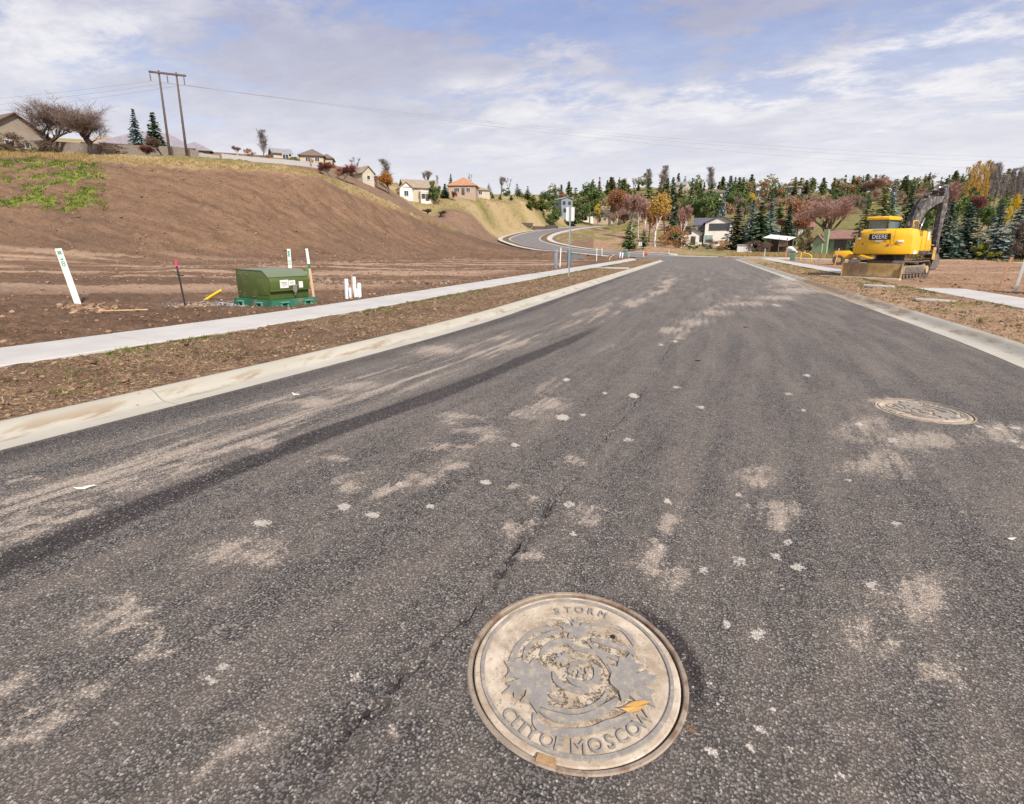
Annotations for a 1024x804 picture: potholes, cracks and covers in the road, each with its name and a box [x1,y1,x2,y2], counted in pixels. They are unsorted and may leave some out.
manhole cover [467,592,689,777]
manhole cover [872,398,978,425]
